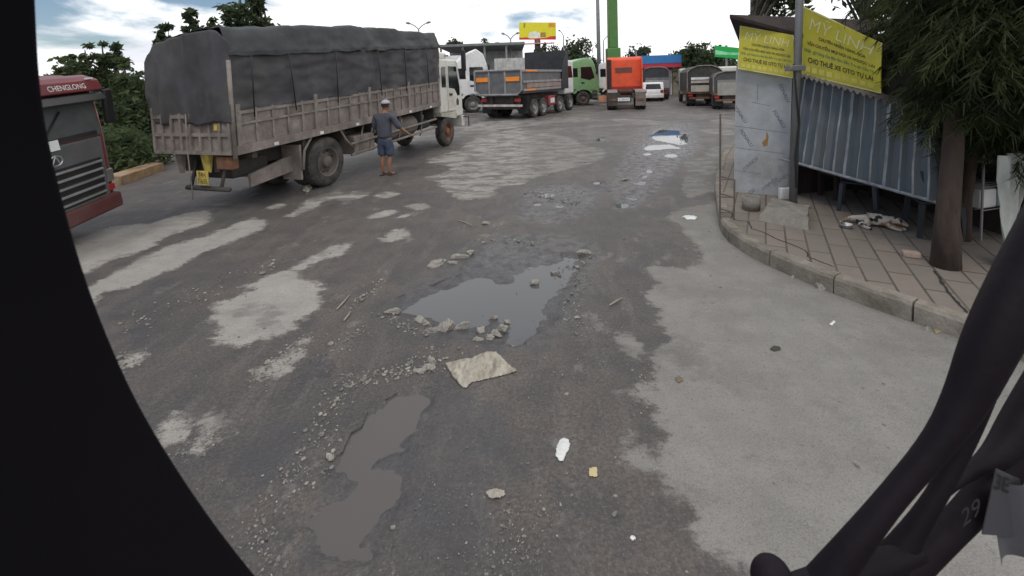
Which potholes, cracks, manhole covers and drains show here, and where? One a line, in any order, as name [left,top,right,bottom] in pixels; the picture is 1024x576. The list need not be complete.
crack [731,213,834,267]
pothole [263,381,456,576]
pothole [630,126,701,160]
pothole [377,239,591,354]
